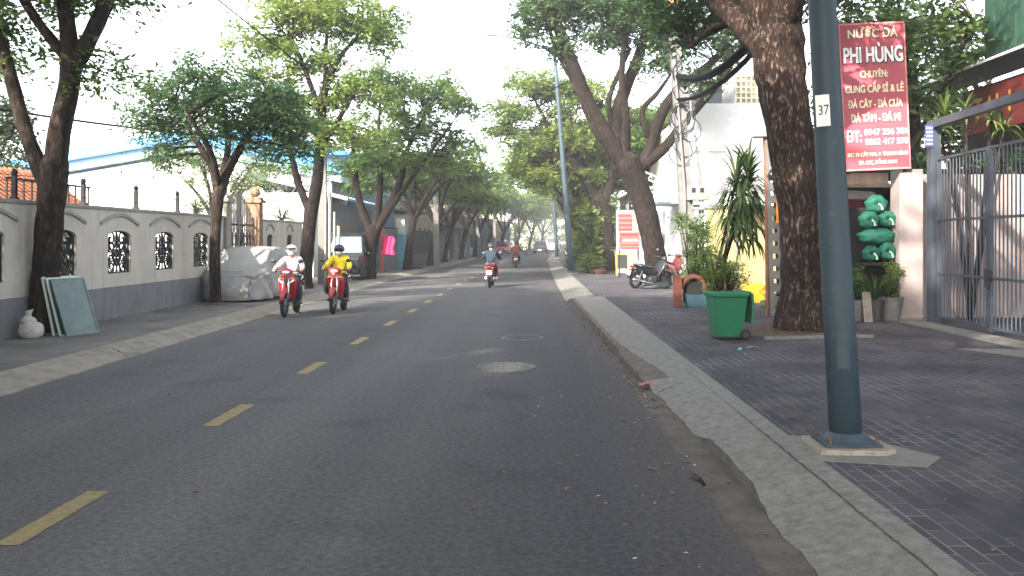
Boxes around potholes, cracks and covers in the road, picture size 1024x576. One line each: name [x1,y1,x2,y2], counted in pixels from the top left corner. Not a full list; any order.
manhole cover [476,362,537,372]
